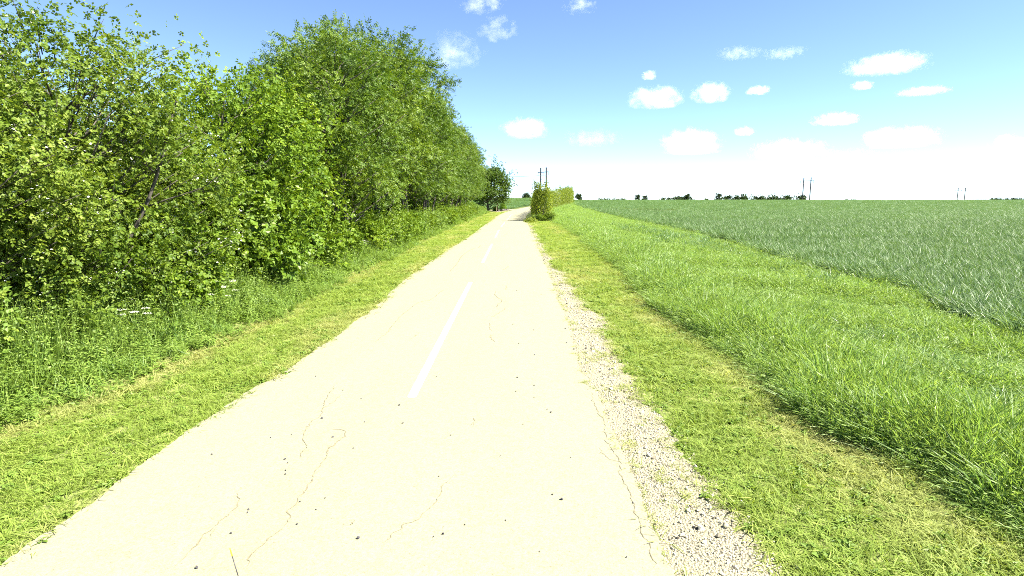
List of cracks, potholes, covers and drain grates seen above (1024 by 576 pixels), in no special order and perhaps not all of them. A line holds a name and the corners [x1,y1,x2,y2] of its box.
crack [247,388,346,565]
crack [176,496,240,565]
crack [591,399,657,567]
